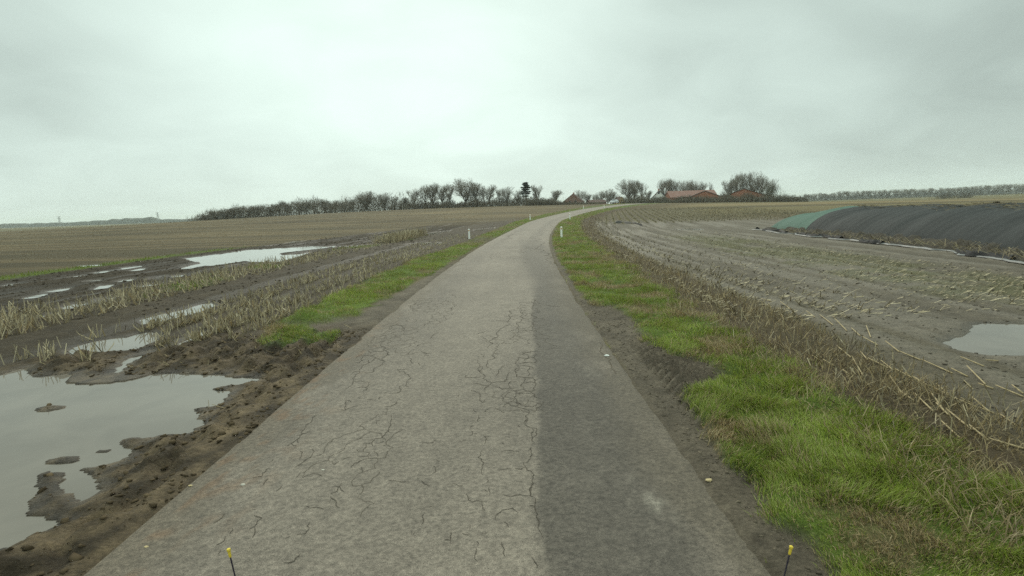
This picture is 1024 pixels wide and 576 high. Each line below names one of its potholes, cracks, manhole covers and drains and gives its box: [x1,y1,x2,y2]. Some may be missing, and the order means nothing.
crack [284,298,455,563]
crack [454,299,560,533]
